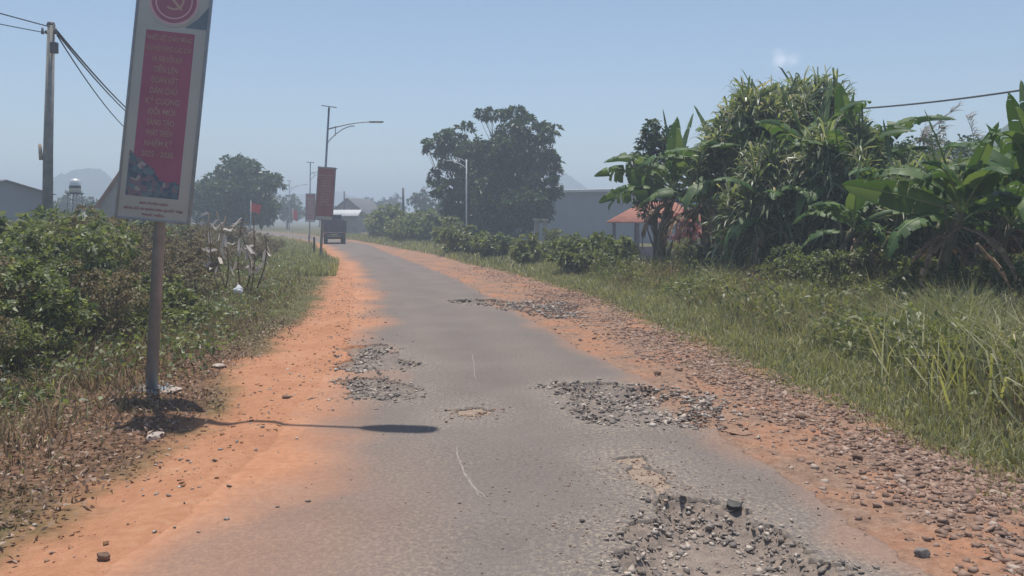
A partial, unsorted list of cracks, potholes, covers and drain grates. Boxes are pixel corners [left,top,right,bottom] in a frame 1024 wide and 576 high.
pothole [438,298,592,319]
crack [456,446,488,500]
pothole [435,401,511,423]
pothole [576,491,880,576]
pothole [331,373,427,404]
pothole [529,378,760,435]
pothole [328,341,425,374]
pothole [603,449,703,504]
